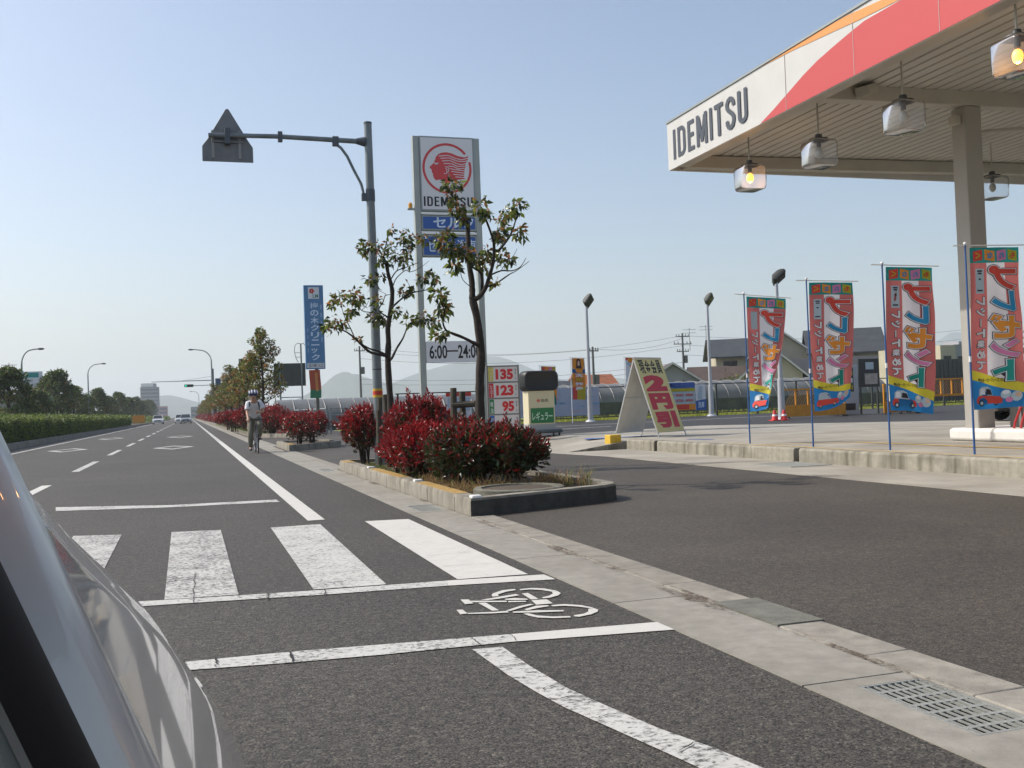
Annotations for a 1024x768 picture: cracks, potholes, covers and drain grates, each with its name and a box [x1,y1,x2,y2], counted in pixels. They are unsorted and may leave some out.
manhole cover [473,483,564,496]
drain grate [860,678,1024,736]
